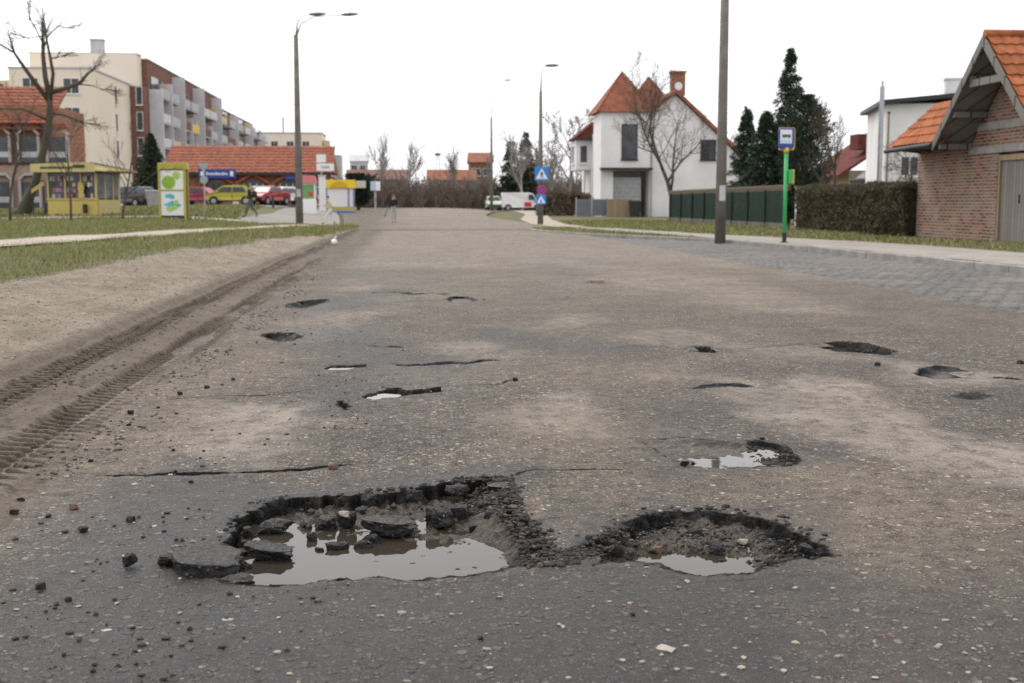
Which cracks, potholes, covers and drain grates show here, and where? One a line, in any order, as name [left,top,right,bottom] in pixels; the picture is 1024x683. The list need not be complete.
pothole [342,384,469,402]
pothole [249,330,312,344]
pothole [898,363,994,382]
pothole [623,434,819,473]
pothole [538,505,857,583]
pothole [199,475,601,594]
pothole [679,380,769,392]
crack [50,460,372,483]
crack [487,464,640,488]
pothole [937,390,1008,402]
pothole [438,294,484,304]
